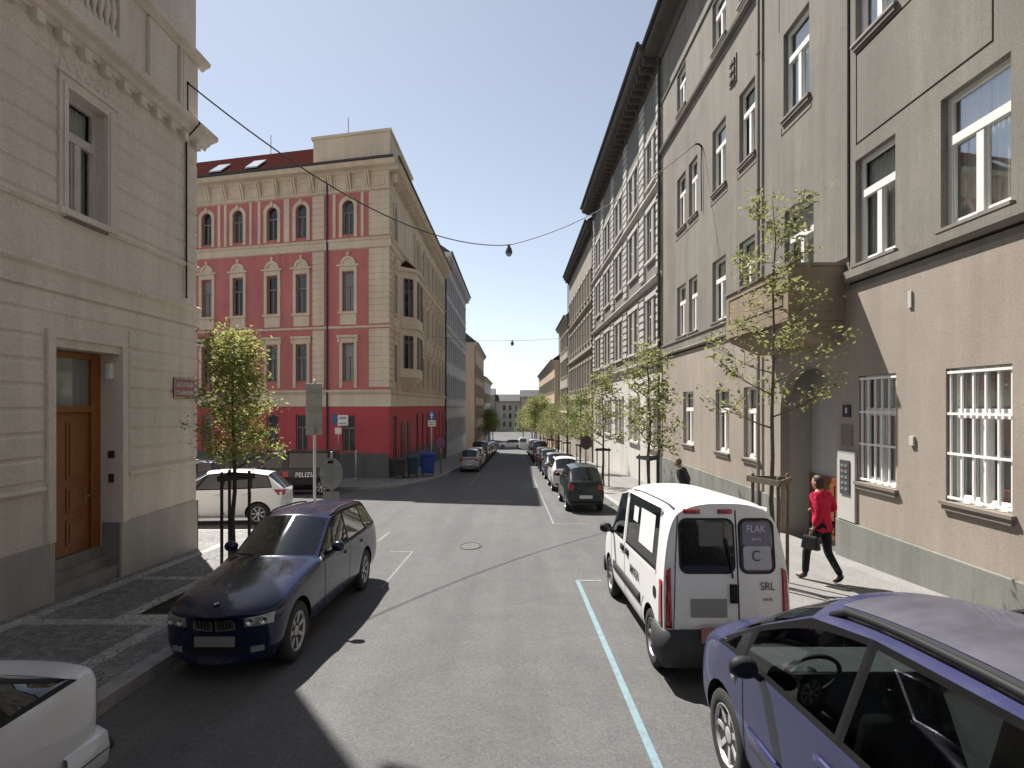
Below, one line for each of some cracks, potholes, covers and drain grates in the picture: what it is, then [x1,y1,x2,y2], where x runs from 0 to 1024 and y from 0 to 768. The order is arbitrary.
manhole cover [459,542,482,550]
